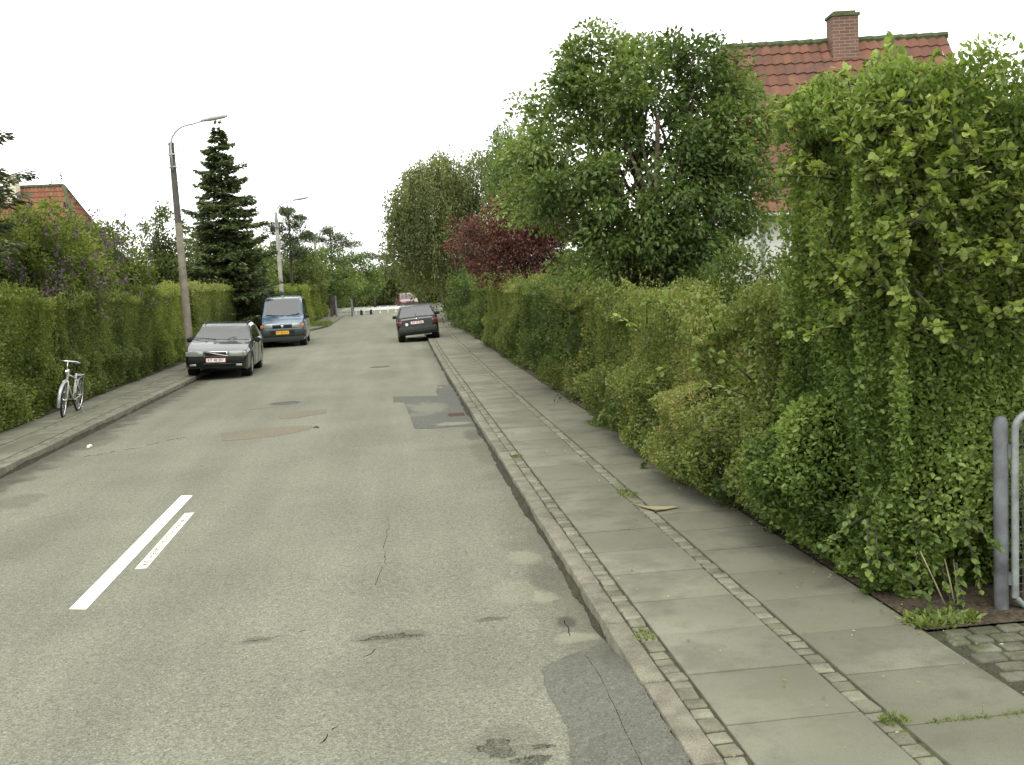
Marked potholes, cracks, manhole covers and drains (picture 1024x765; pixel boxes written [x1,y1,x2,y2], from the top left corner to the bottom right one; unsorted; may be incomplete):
crack [585,655,642,765]
